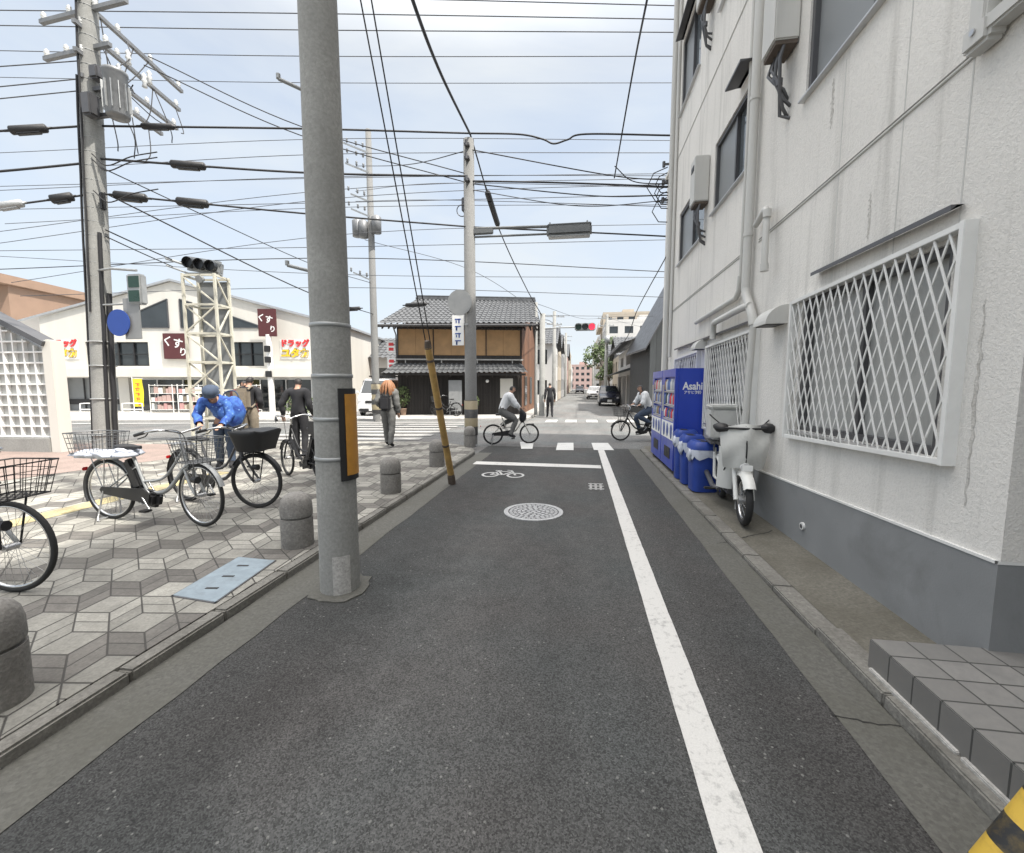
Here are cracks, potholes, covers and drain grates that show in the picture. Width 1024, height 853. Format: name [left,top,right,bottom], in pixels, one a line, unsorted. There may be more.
crack [831,713,900,726]
manhole cover [504,503,563,521]
